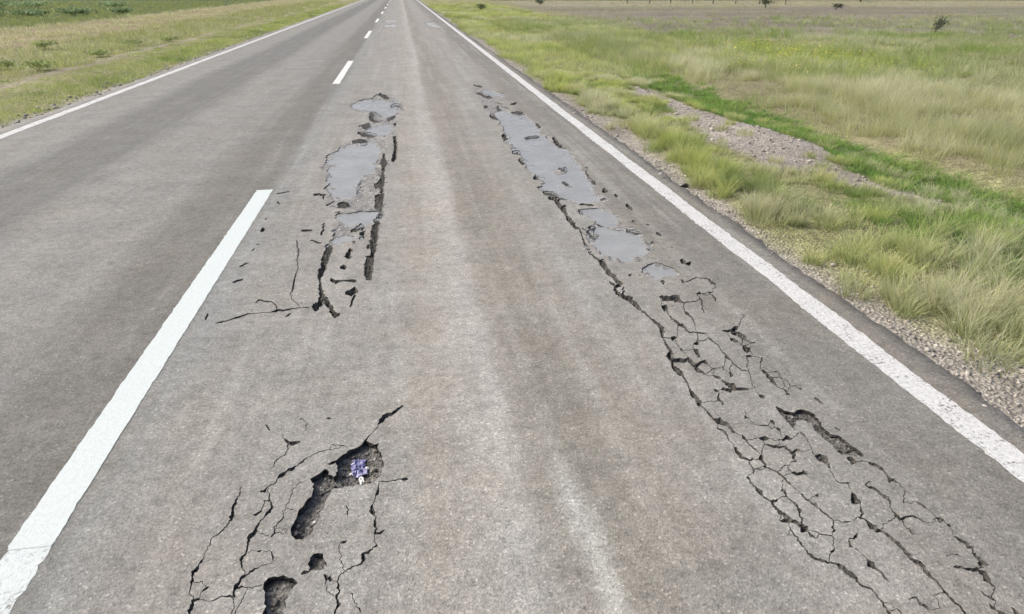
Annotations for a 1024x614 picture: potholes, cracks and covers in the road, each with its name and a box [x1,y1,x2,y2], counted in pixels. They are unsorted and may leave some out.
crack [473,84,1022,614]
crack [205,93,400,323]
pothole [262,575,298,614]
pothole [290,440,384,540]
crack [187,405,409,614]
